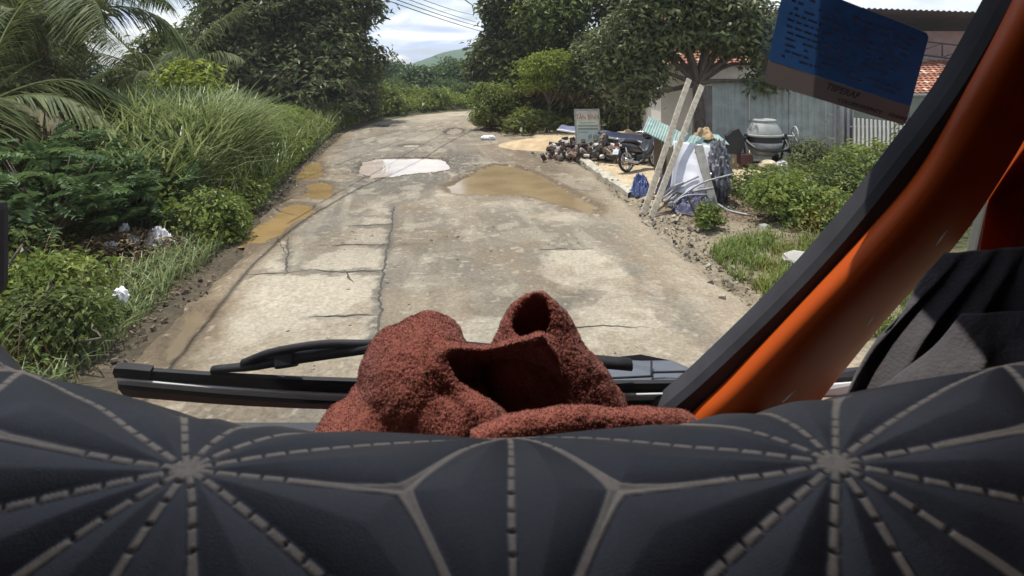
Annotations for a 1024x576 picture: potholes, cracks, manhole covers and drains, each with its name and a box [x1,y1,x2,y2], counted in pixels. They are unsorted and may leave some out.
pothole [301,180,336,198]
crack [247,236,307,275]
pothole [251,201,318,244]
pothole [441,163,604,214]
